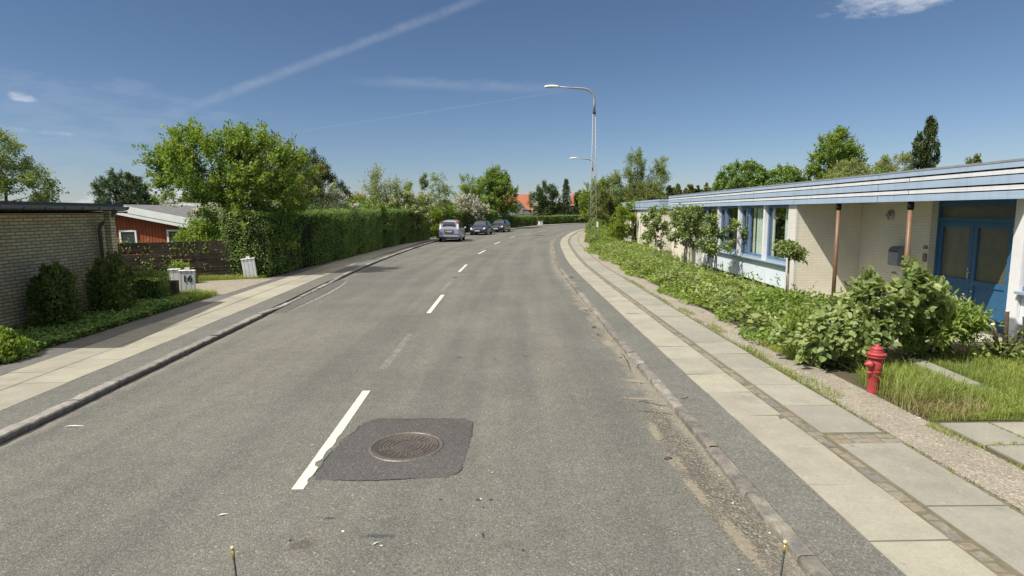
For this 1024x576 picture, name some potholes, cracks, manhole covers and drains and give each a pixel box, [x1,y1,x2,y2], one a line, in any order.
manhole cover [368,432,444,462]
